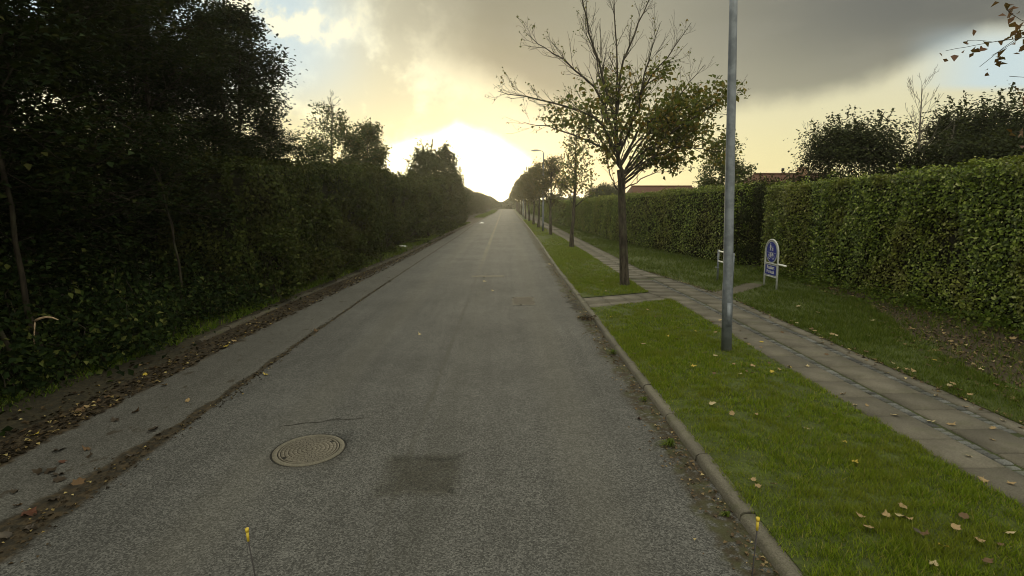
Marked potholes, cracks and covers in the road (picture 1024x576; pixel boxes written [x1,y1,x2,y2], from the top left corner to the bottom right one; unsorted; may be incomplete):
crack [280,417,378,427]
manhole cover [270,434,347,467]
